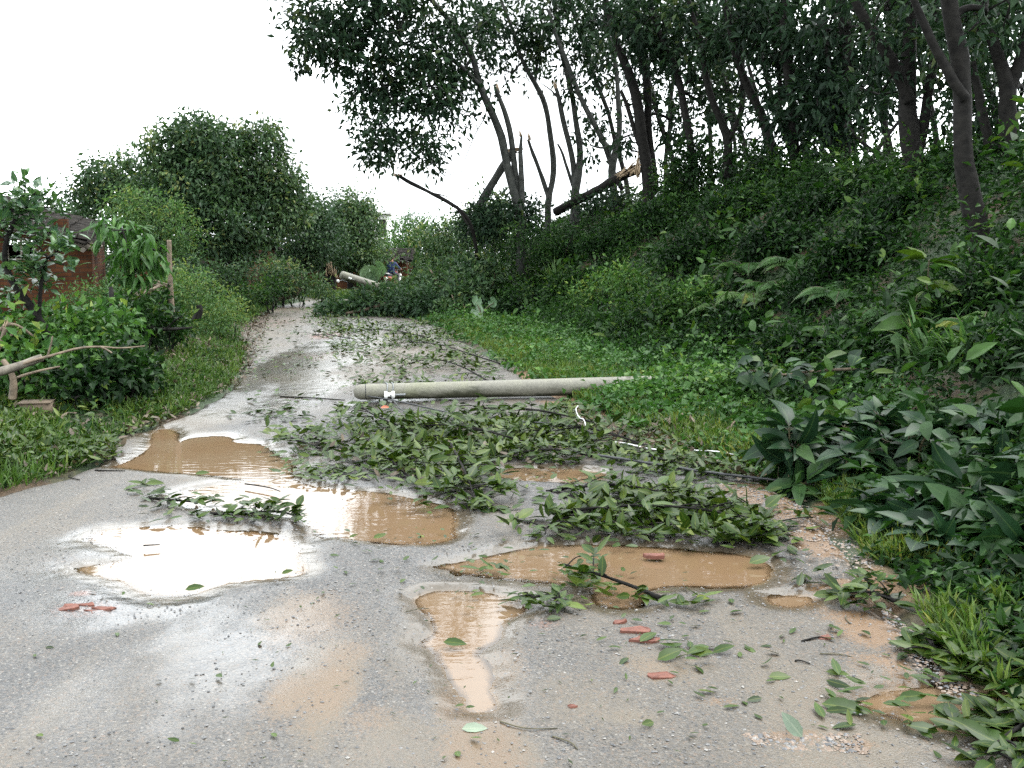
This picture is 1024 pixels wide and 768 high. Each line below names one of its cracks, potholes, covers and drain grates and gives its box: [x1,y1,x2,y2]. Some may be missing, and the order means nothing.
pothole [489,464,614,483]
pothole [422,538,791,613]
pothole [835,674,982,736]
pothole [403,583,542,717]
pothole [101,426,470,546]
pothole [57,520,324,603]
pothole [753,591,824,609]
